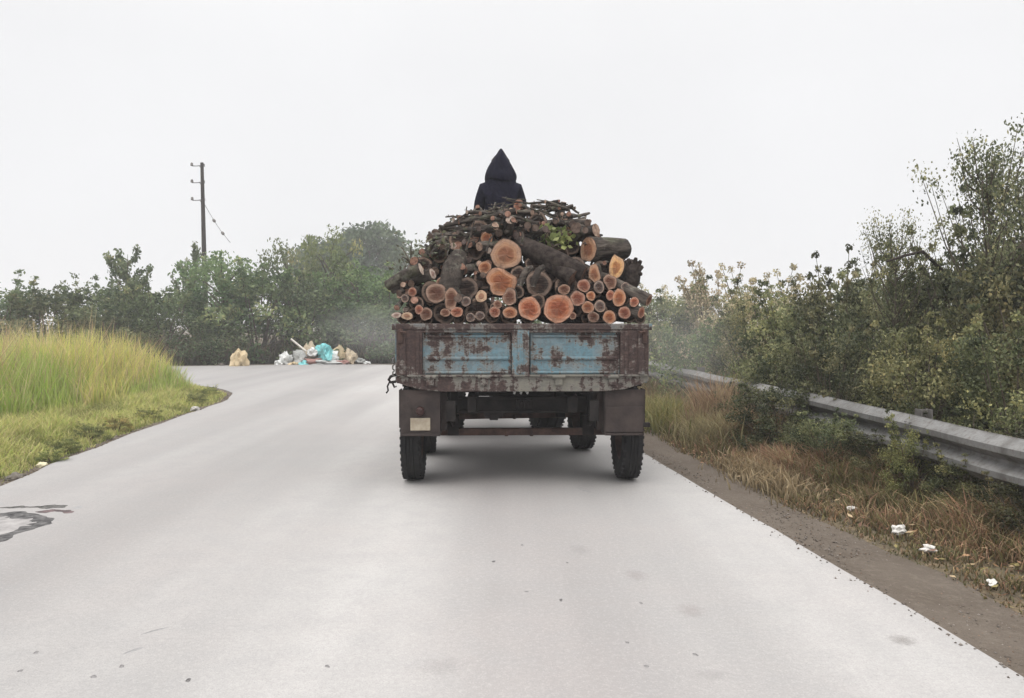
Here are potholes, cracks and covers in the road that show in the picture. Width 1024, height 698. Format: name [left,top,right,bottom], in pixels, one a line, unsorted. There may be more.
pothole [0,511,54,542]
